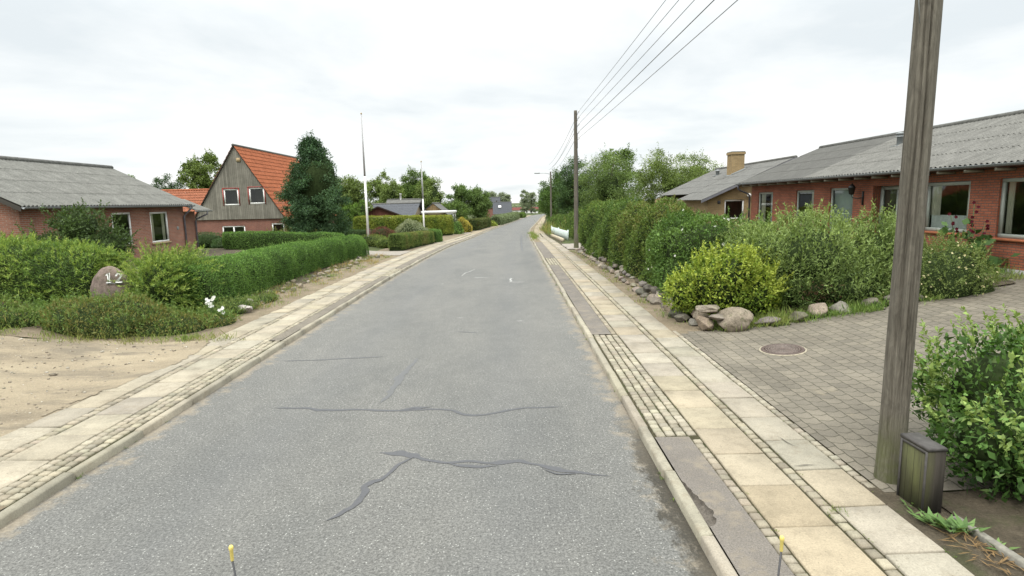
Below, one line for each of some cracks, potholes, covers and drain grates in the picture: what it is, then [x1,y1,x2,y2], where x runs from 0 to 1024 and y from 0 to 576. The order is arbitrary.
manhole cover [759,344,807,356]
